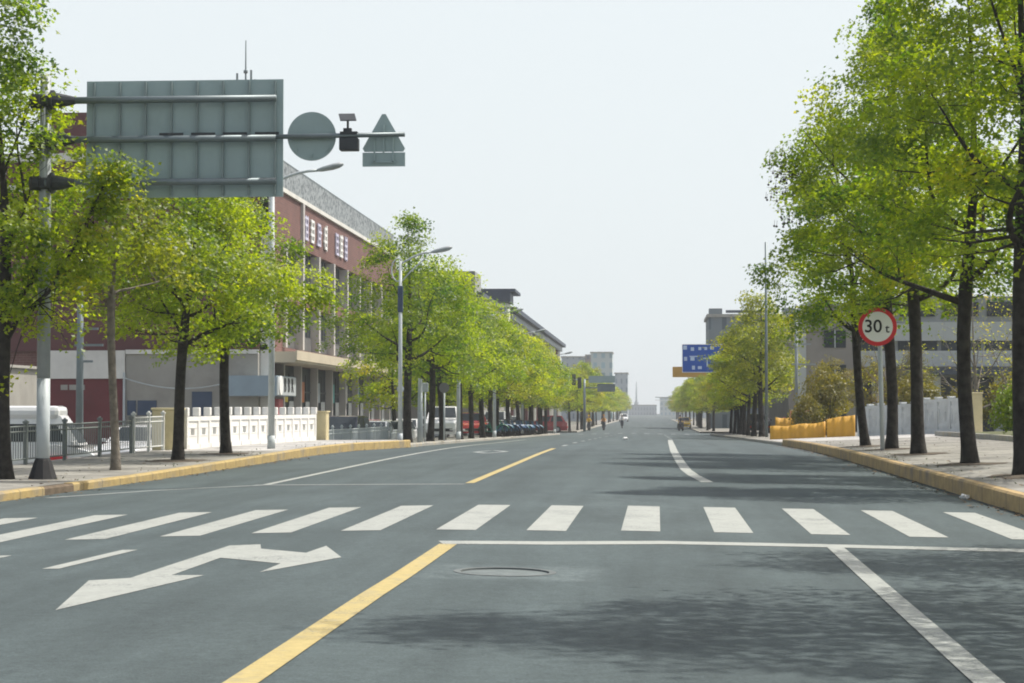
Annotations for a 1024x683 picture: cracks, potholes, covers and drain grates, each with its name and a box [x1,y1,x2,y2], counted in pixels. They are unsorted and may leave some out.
manhole cover [454,567,556,578]
